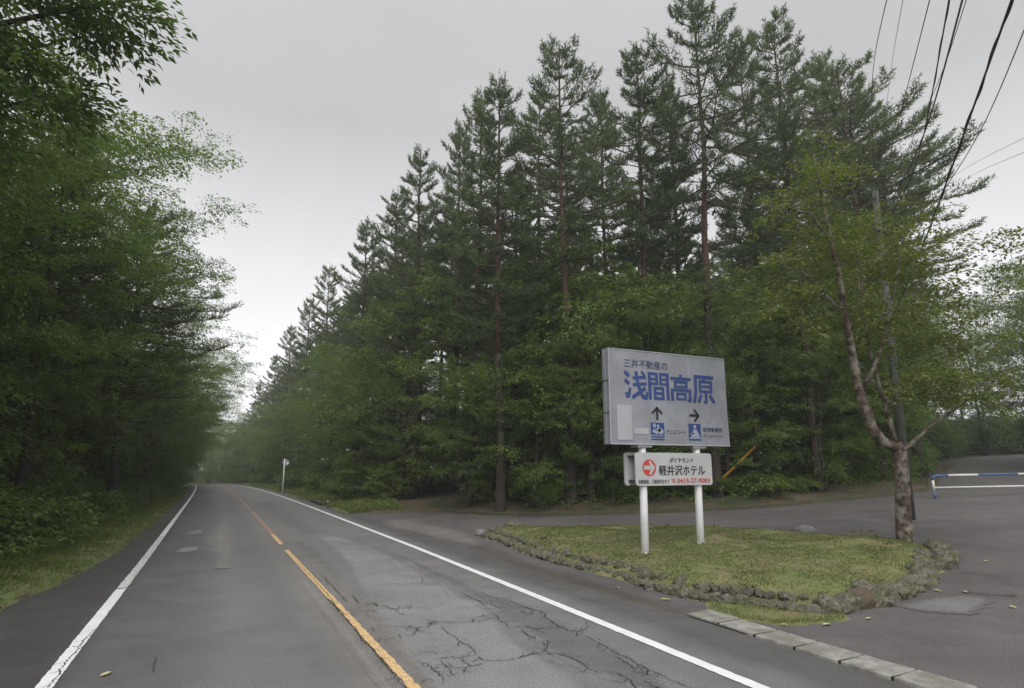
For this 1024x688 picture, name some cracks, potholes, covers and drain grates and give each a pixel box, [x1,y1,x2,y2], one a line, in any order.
crack [301,566,704,688]
